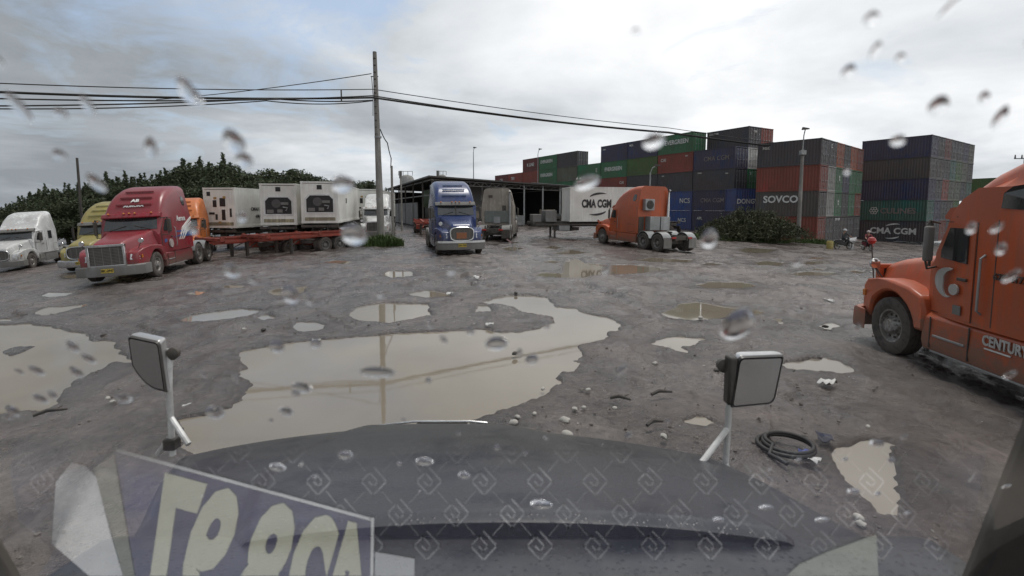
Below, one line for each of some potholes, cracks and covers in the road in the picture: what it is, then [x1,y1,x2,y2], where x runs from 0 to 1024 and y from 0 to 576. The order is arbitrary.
pothole [174,293,627,456]
pothole [656,300,772,321]
pothole [645,333,710,355]
pothole [782,353,864,374]
pothole [28,301,94,316]
pothole [0,320,132,414]
pothole [530,257,675,278]
pothole [819,435,922,521]
